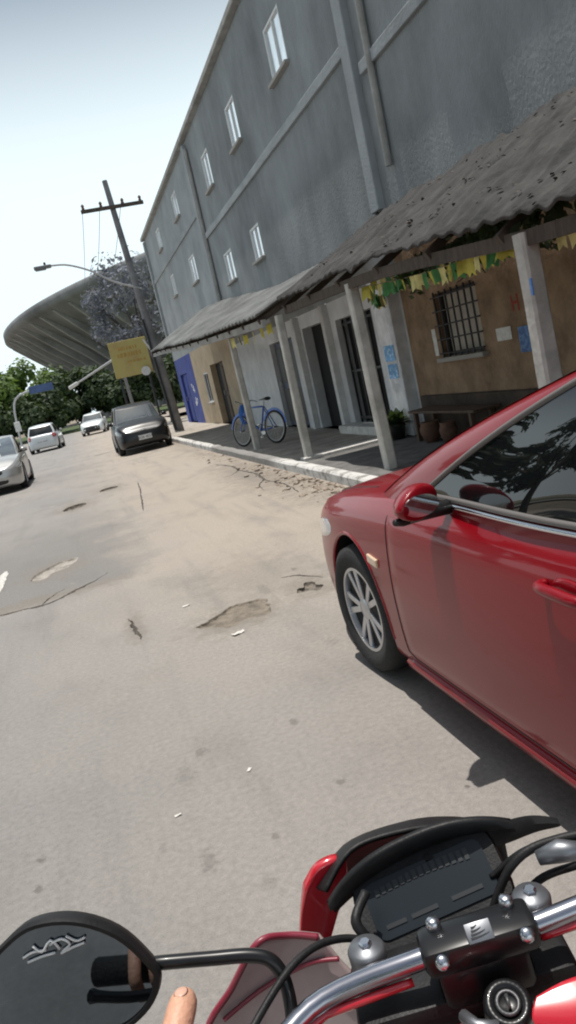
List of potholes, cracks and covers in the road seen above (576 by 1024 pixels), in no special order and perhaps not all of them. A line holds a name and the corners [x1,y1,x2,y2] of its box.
pothole [297,581,324,593]
pothole [30,557,78,582]
crack [128,619,143,639]
pothole [196,598,271,629]
crack [223,465,298,492]
crack [0,573,107,616]
